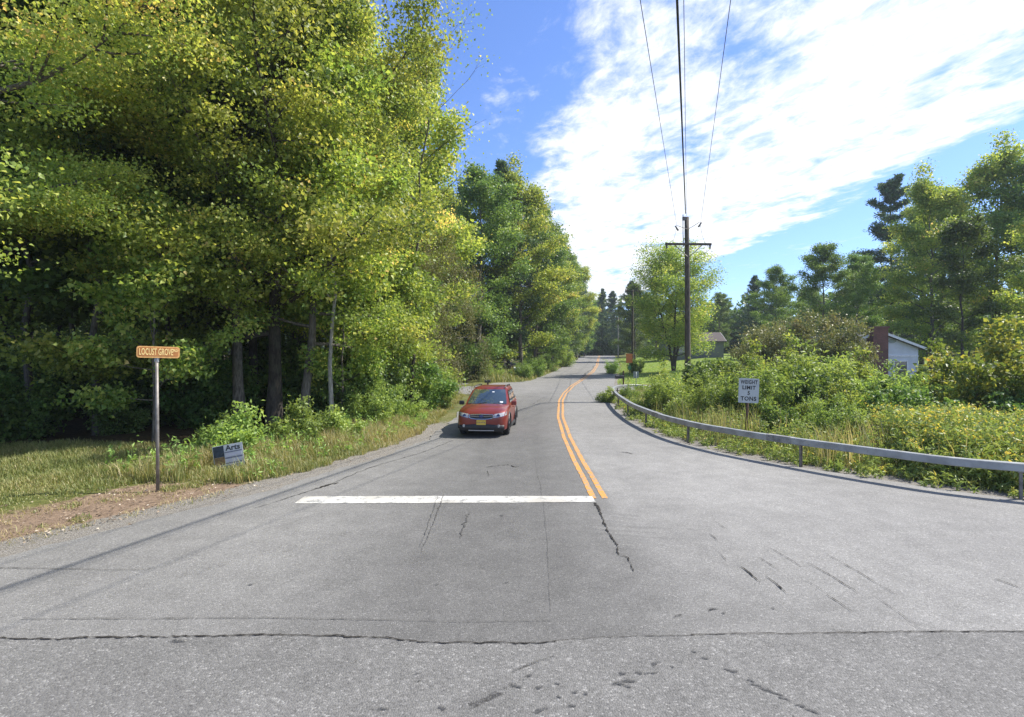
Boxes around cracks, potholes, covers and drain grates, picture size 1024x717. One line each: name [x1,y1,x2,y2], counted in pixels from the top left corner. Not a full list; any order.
crack [420,494,444,550]
crack [0,524,1014,644]
crack [594,503,634,571]
